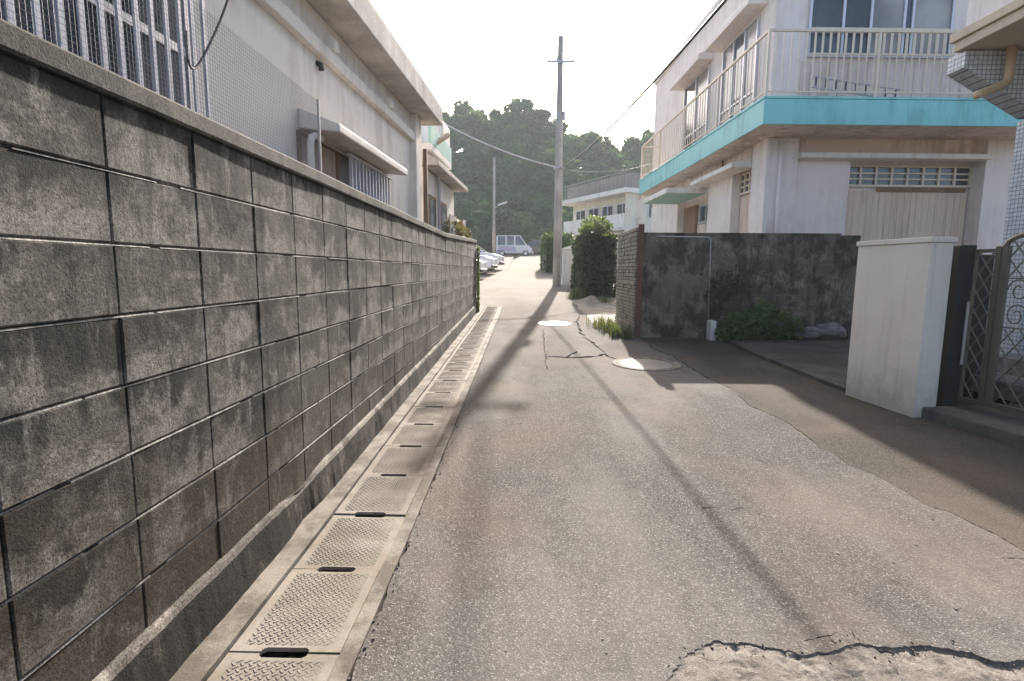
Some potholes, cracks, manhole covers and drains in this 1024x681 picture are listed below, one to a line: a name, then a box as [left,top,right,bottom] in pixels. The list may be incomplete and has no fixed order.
manhole cover [612,357,681,371]
crack [542,314,615,369]
